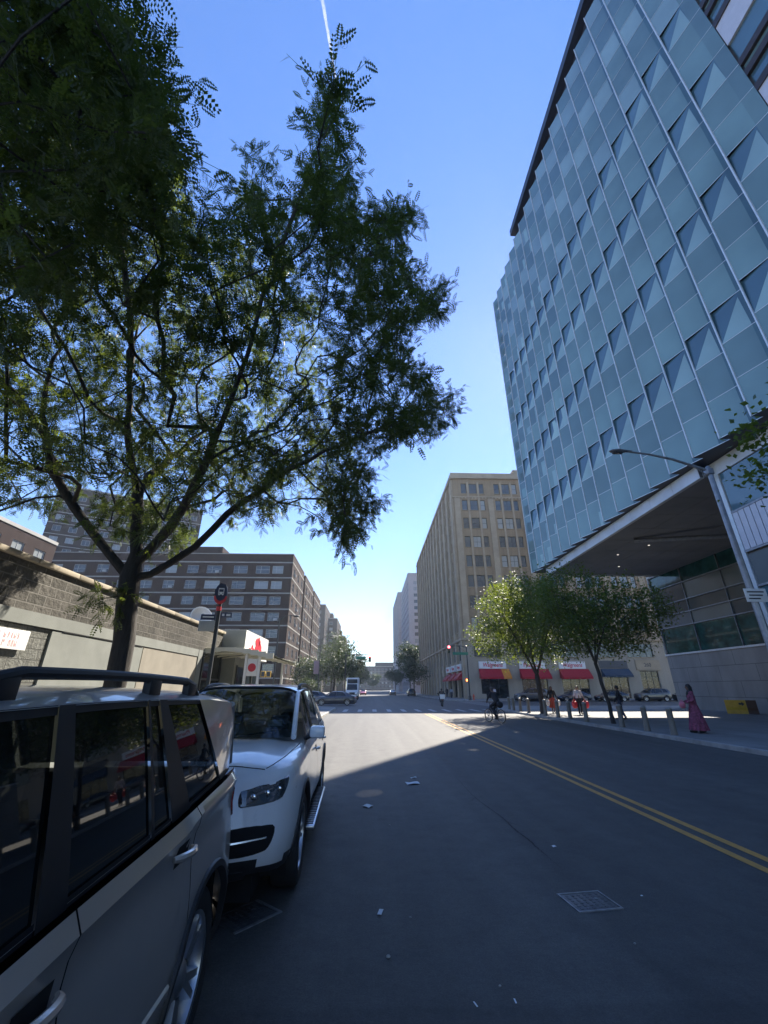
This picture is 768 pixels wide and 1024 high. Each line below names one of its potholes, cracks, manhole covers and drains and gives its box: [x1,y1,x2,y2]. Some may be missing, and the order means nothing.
crack [457,778,560,868]
